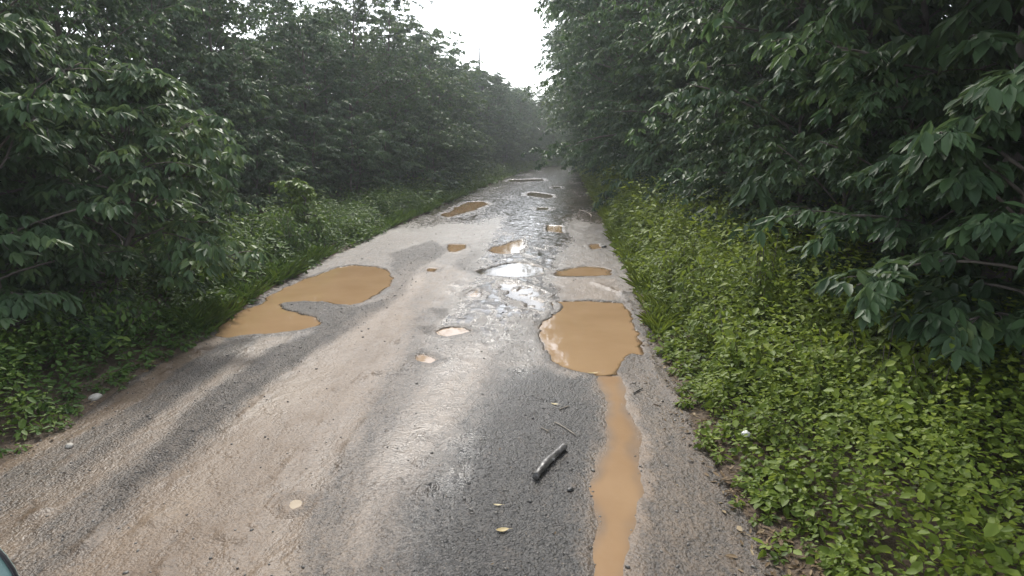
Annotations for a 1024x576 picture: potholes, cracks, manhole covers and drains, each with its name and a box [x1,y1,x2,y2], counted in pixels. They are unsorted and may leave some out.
pothole [528,299,656,379]
pothole [469,261,557,278]
pothole [491,278,563,315]
pothole [543,225,567,233]
pothole [205,264,401,341]
pothole [455,287,491,300]
pothole [543,265,618,278]
